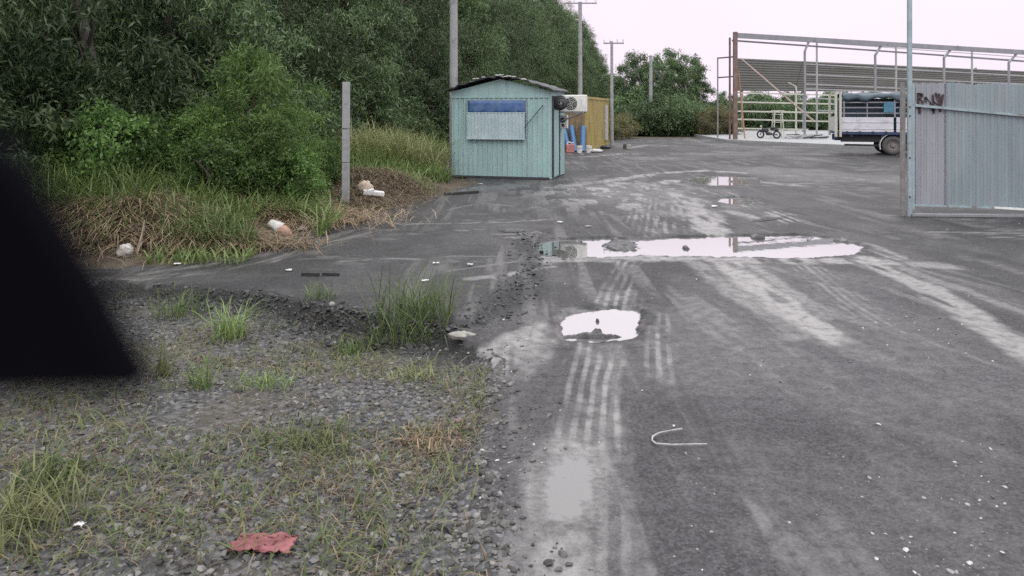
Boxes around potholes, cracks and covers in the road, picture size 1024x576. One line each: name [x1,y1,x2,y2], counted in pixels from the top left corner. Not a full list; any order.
pothole [529,301,671,352]
pothole [516,231,883,262]
